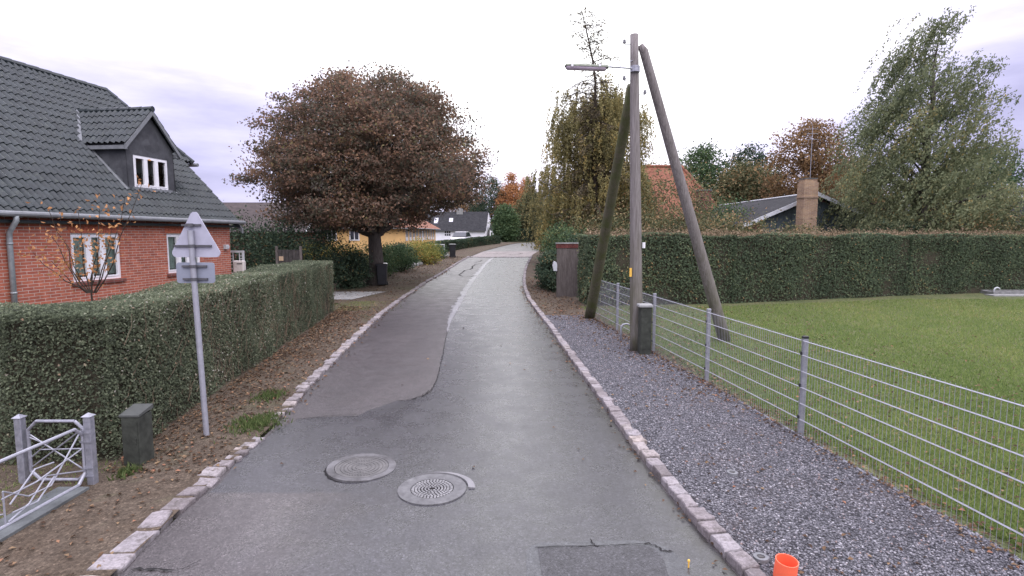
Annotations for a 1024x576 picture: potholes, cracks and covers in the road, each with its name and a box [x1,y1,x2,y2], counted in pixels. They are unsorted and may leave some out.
manhole cover [398,472,475,506]
manhole cover [324,453,396,483]
crack [544,539,671,552]
